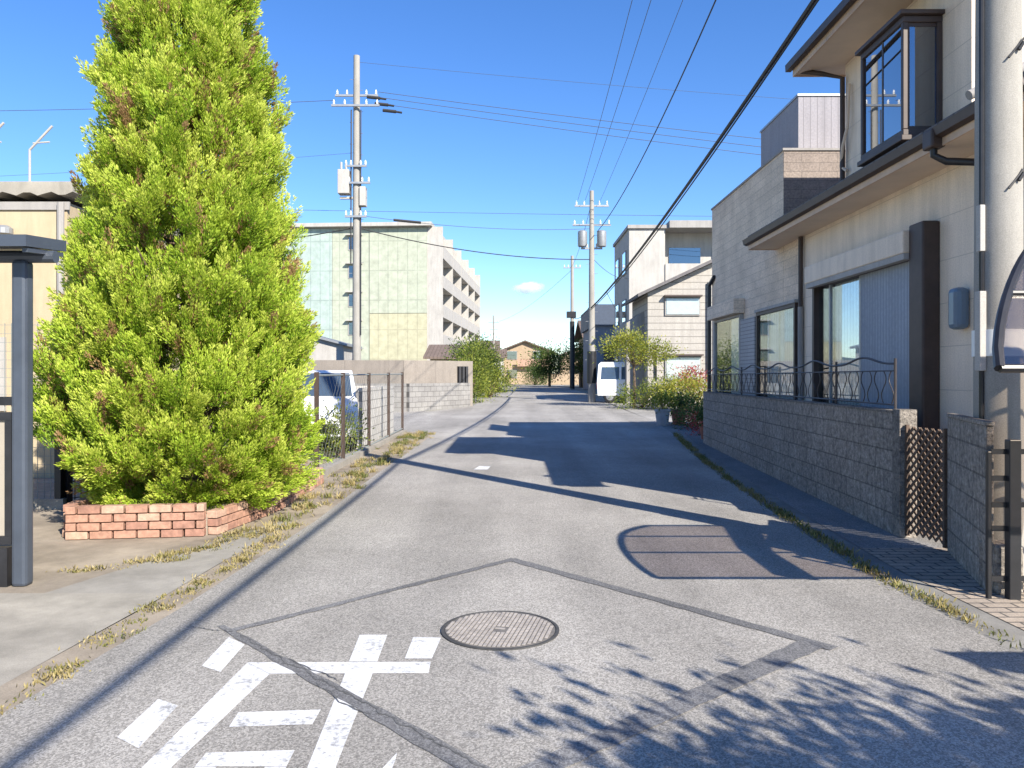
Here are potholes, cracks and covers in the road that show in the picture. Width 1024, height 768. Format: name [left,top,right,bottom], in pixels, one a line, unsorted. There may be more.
manhole cover [441,611,559,651]
